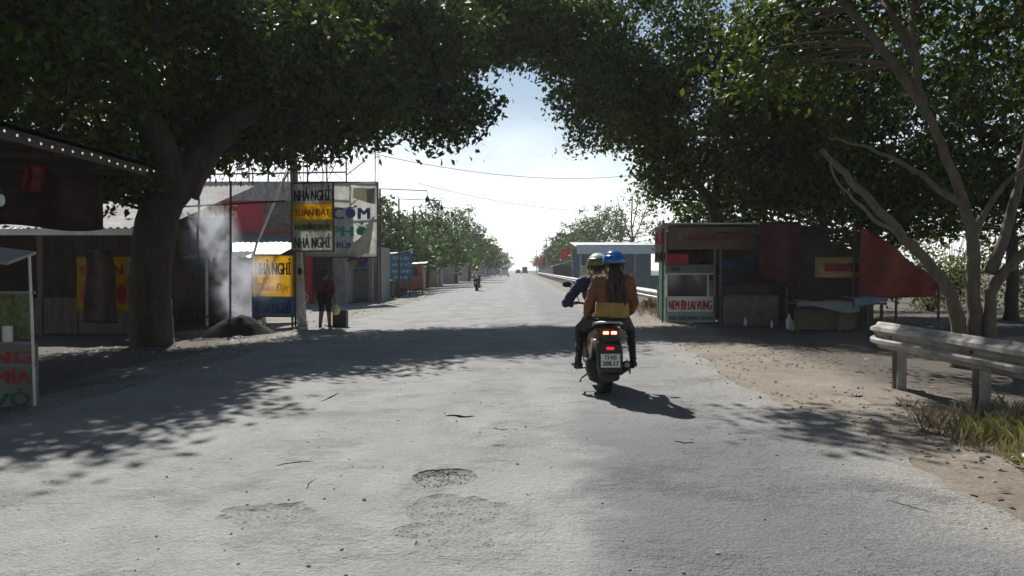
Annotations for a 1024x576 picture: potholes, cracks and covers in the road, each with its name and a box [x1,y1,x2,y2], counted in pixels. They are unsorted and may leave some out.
pothole [389,493,511,558]
pothole [215,501,317,528]
pothole [412,468,478,488]
